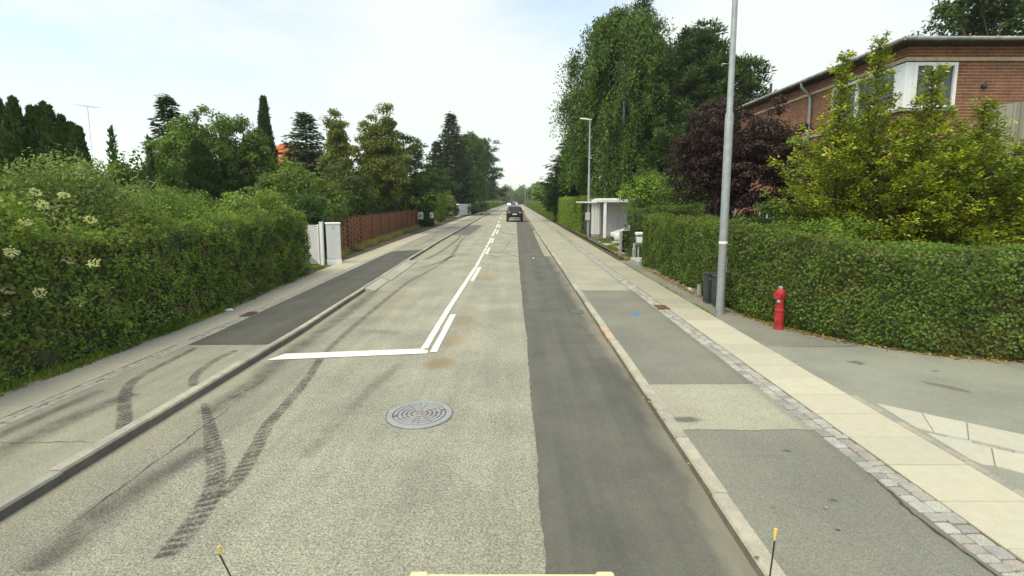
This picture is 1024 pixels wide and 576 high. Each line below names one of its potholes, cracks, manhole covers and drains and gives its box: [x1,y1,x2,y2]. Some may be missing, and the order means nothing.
manhole cover [385,401,453,429]
